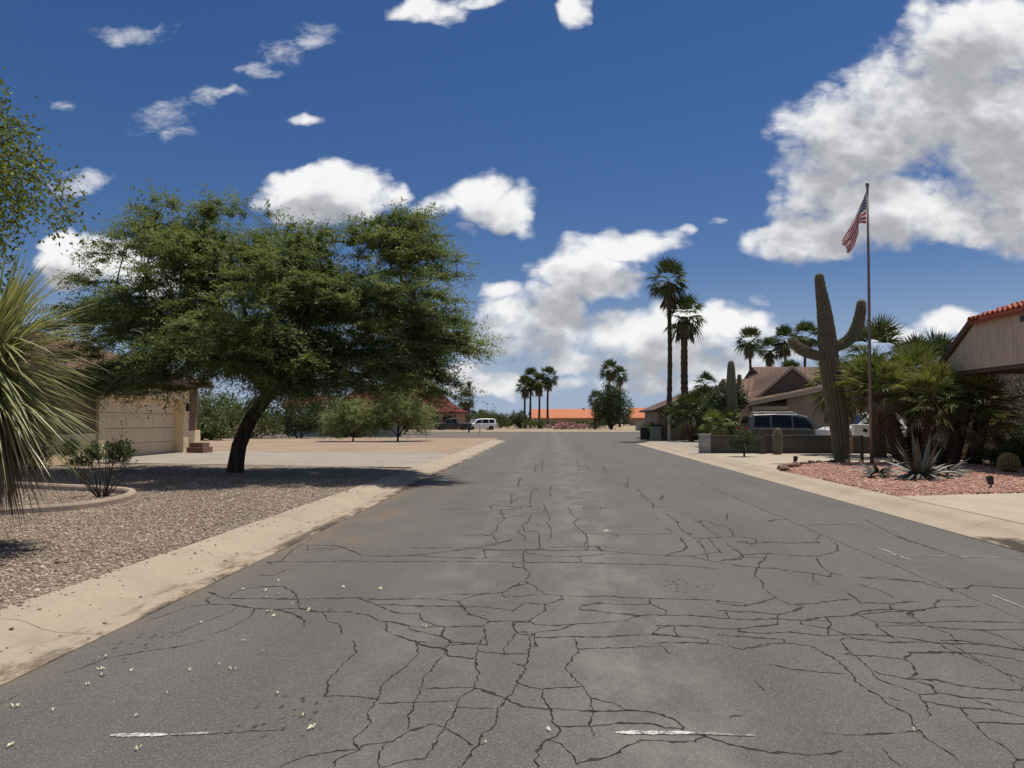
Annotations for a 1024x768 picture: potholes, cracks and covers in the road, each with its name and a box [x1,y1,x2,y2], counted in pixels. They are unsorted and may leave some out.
crack [64,640,203,674]
crack [146,459,1024,768]
